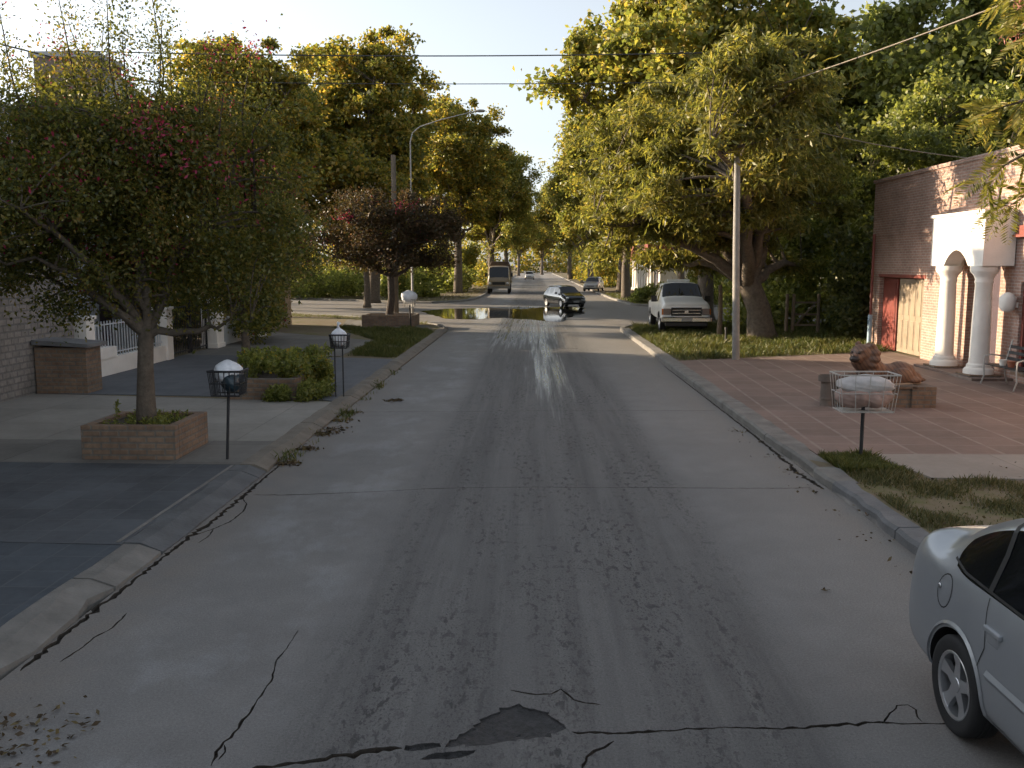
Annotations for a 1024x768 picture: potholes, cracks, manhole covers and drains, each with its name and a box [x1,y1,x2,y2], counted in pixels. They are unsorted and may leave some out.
pothole [445,704,566,747]
crack [511,689,600,705]
crack [20,454,402,768]
crack [573,705,945,768]
